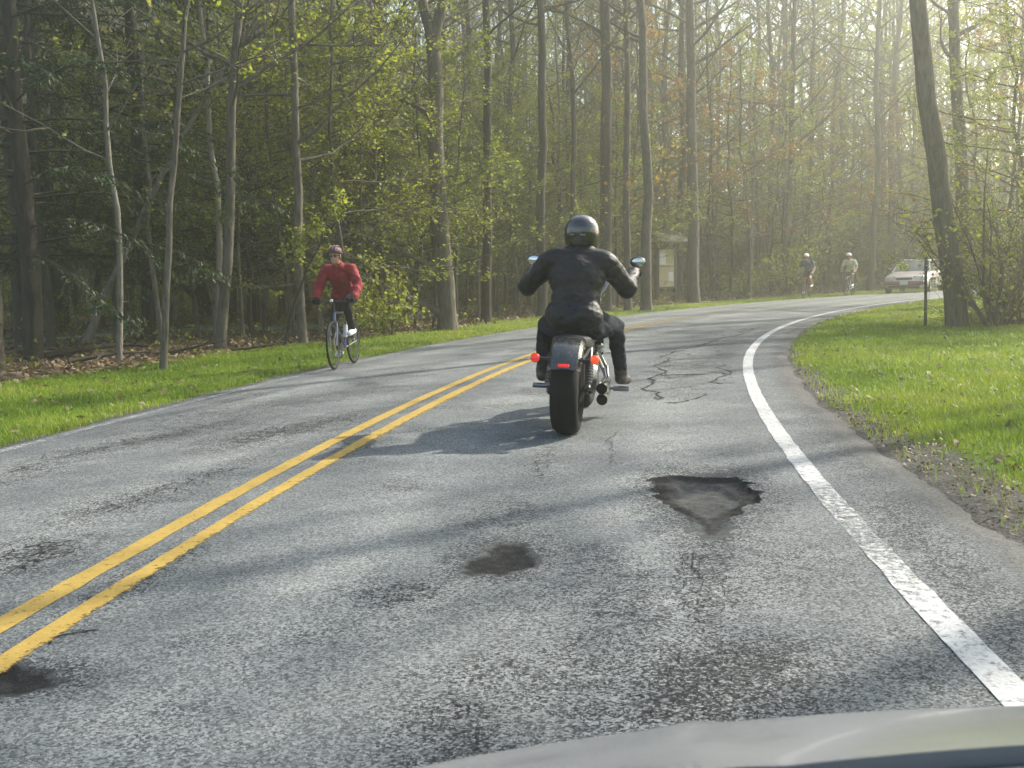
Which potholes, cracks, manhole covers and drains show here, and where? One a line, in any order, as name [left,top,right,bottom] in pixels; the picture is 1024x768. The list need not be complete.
crack [641,325,766,404]
pothole [646,475,765,540]
crack [664,539,744,631]
